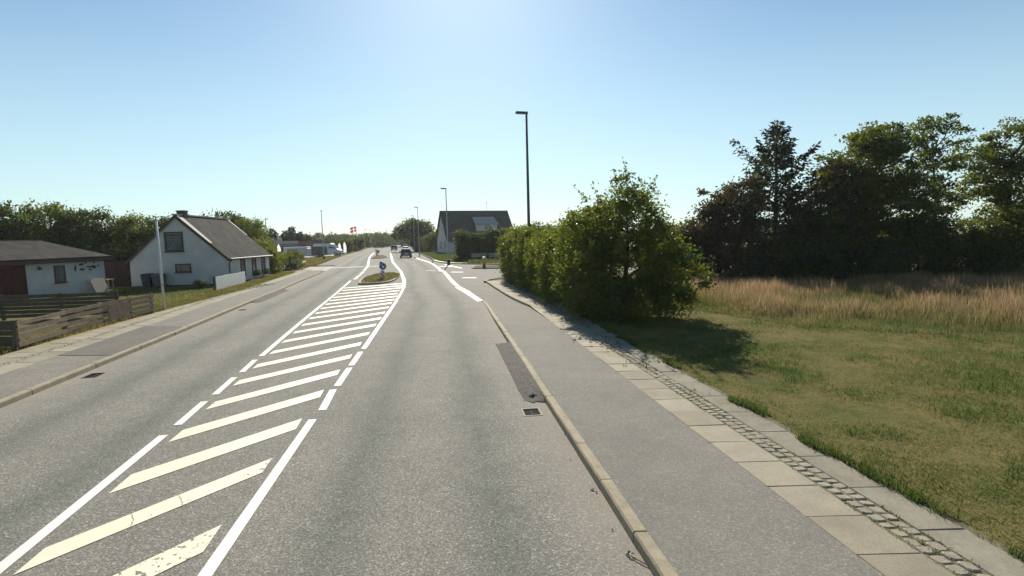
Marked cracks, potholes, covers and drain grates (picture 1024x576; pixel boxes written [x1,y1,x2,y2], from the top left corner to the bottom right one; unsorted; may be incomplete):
drain grate [521,407,543,417]
